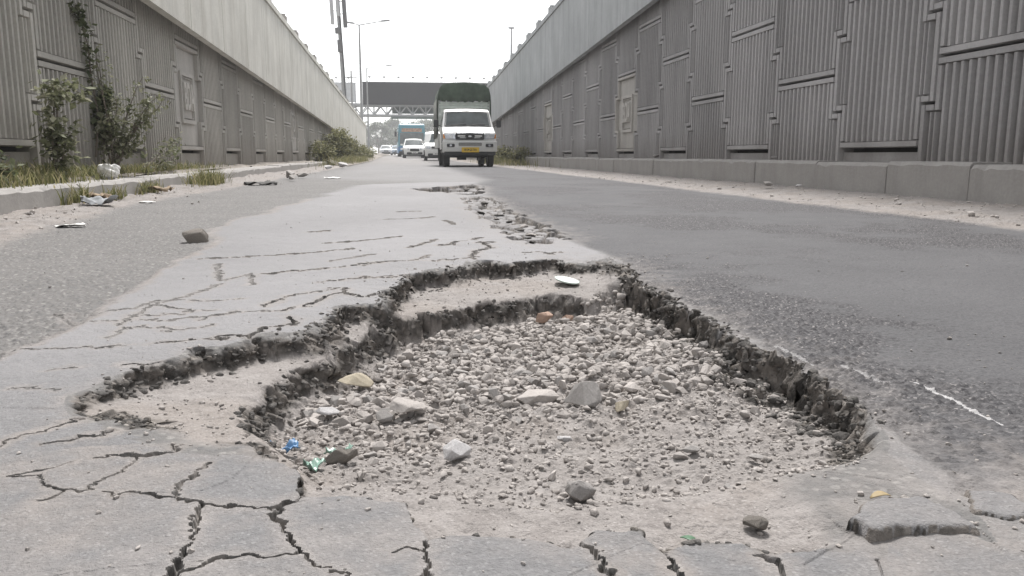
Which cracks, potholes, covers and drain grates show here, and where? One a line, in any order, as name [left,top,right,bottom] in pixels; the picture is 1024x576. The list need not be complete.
crack [667,556,685,576]
pothole [63,257,998,576]
pothole [459,196,576,246]
crack [391,540,434,576]
pothole [410,184,487,195]
crack [583,544,617,576]
crack [0,419,352,576]
crack [12,211,496,365]
